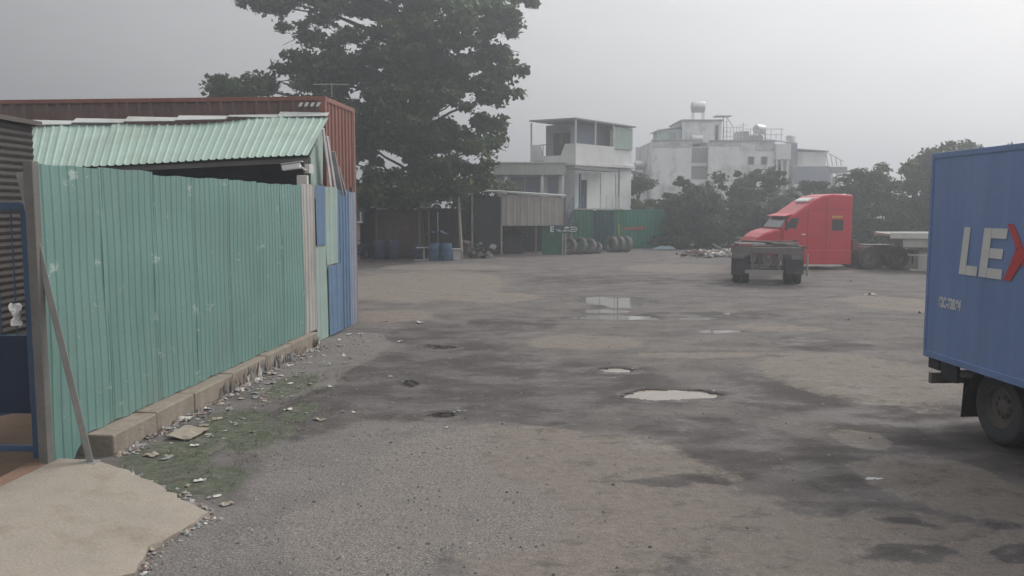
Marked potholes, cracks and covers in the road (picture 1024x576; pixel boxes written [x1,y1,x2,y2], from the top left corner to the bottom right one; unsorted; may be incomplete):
pothole [414,410,467,421]
pothole [607,387,738,403]
pothole [391,378,430,390]
pothole [588,366,643,375]
